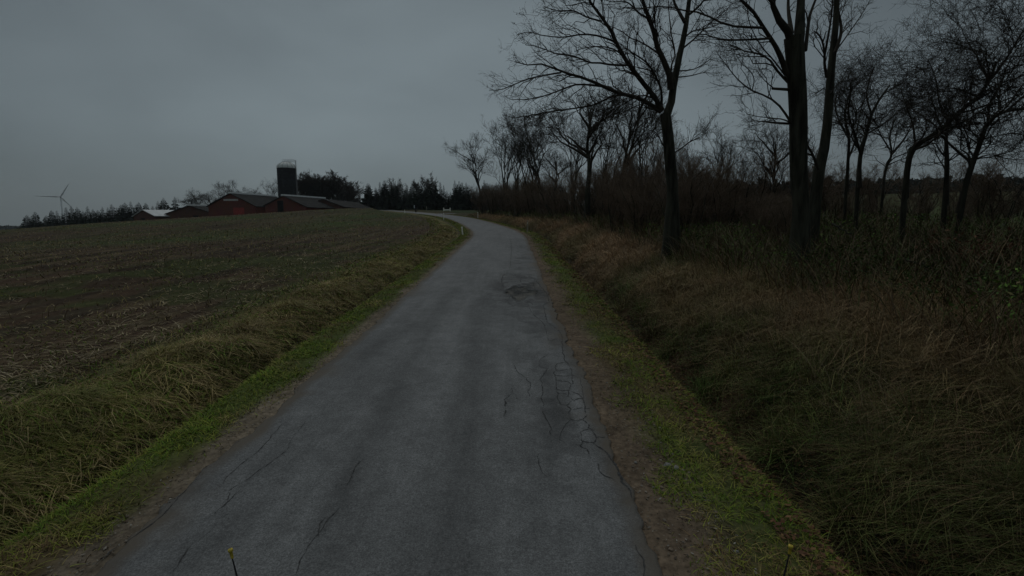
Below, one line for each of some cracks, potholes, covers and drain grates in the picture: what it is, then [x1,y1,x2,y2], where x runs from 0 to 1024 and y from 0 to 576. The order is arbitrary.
crack [501,273,632,497]
crack [296,513,334,573]
crack [173,422,305,571]
pothole [504,285,540,302]
